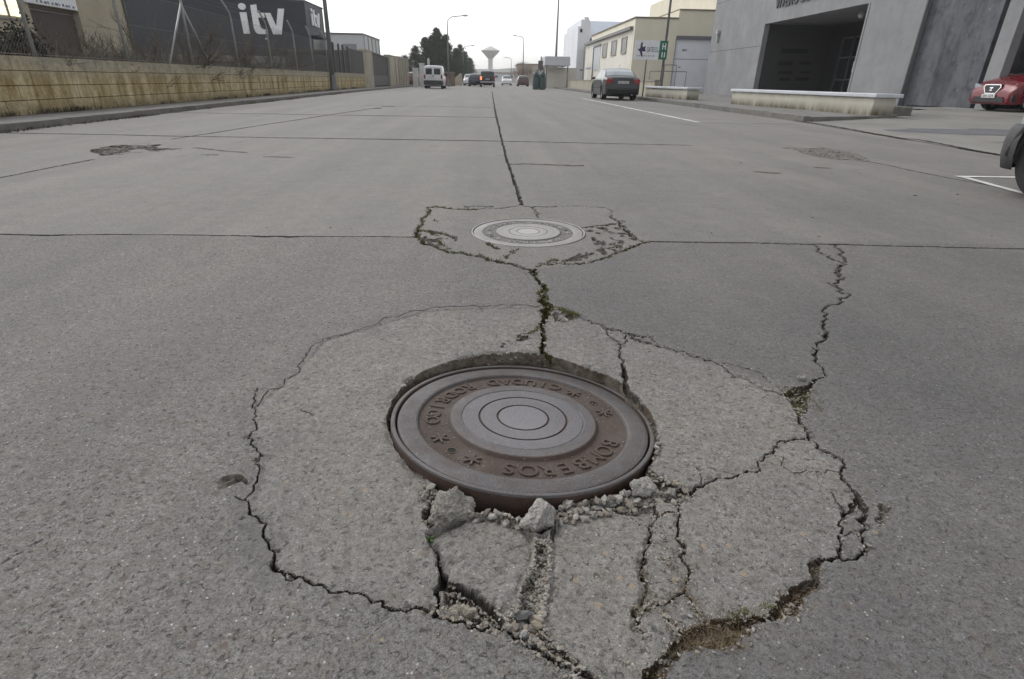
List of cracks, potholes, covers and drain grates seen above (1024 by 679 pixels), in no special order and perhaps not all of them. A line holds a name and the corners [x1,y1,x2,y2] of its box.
manhole cover [390,365,655,518]
crack [414,206,651,274]
manhole cover [471,218,585,247]
crack [234,269,871,679]
